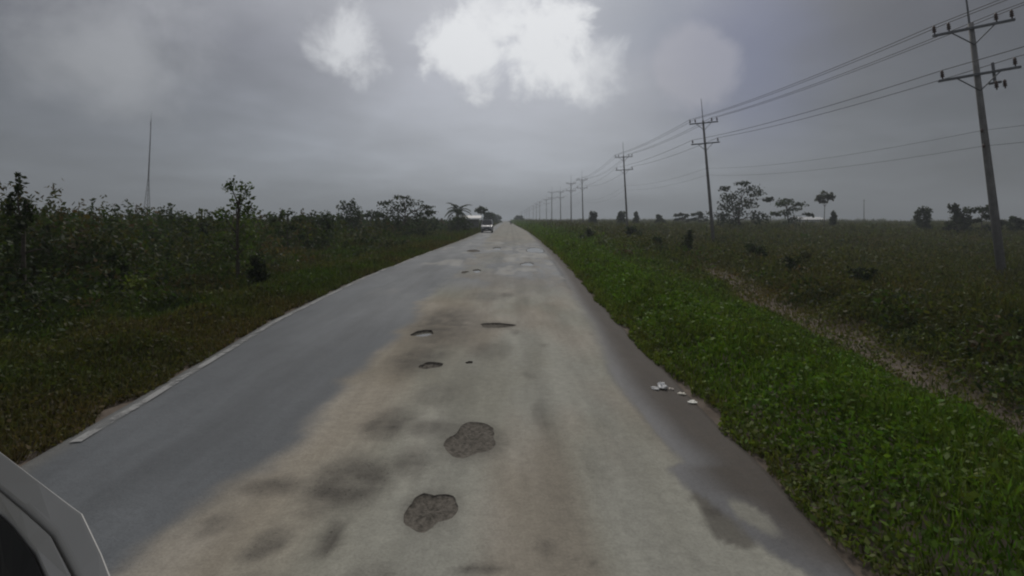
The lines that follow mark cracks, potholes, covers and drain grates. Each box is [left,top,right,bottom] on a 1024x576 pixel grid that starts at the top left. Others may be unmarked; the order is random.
pothole [443,422,495,458]
pothole [404,493,458,533]
